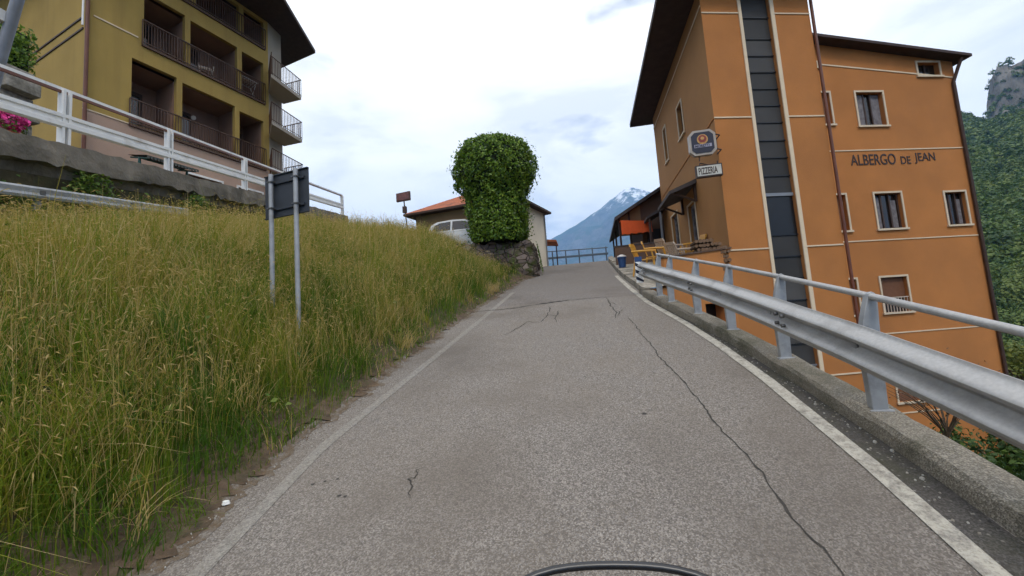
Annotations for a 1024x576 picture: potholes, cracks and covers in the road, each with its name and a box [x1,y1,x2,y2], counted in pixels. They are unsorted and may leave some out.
crack [478,297,845,576]
